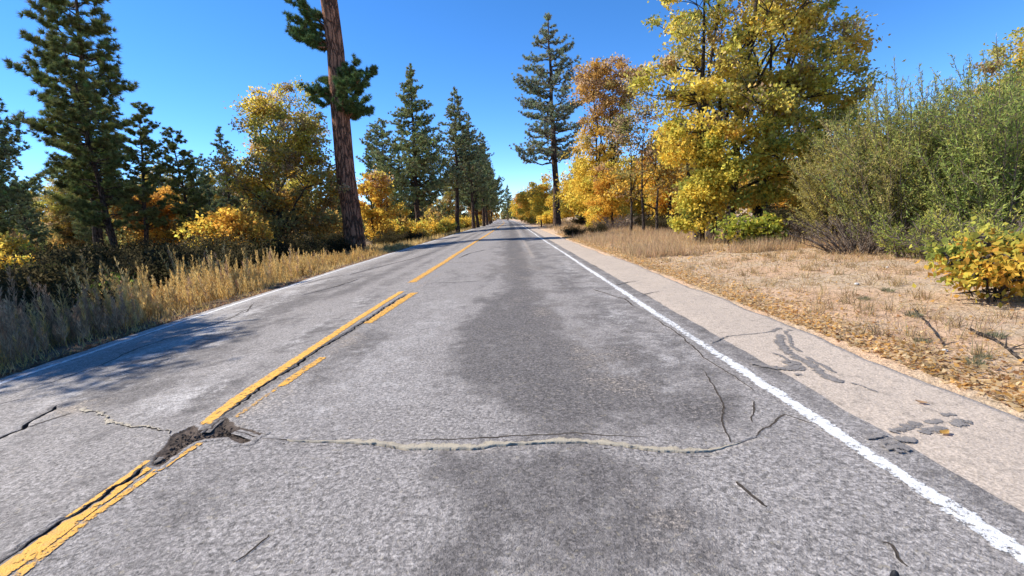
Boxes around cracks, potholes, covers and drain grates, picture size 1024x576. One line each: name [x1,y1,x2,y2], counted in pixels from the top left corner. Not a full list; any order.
crack [882,541,908,566]
crack [0,252,816,457]
pothole [143,415,271,472]
